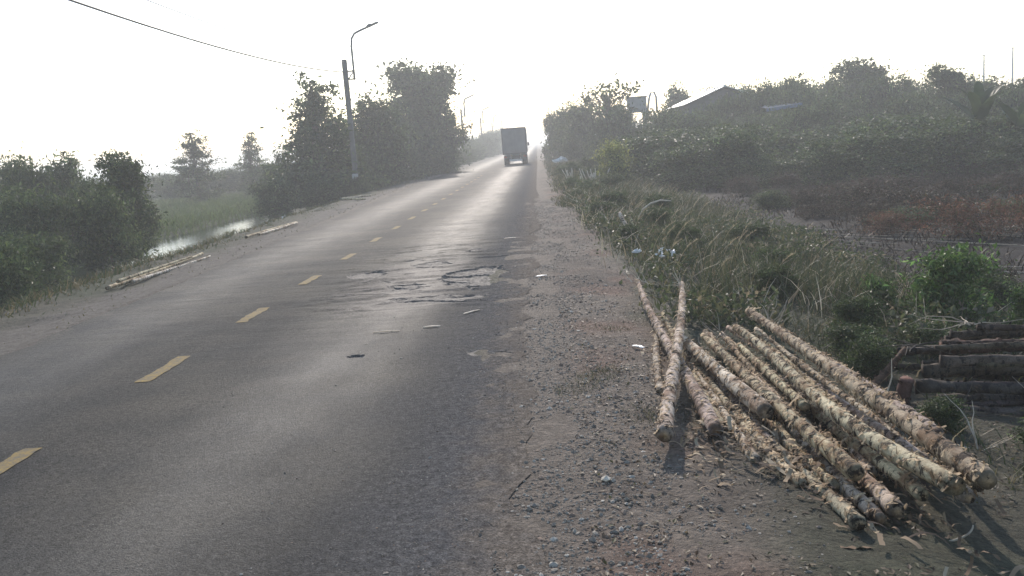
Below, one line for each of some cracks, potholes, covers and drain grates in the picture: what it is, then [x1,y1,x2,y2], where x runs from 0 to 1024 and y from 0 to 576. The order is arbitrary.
pothole [346,270,389,279]
pothole [387,293,489,304]
pothole [439,264,511,290]
